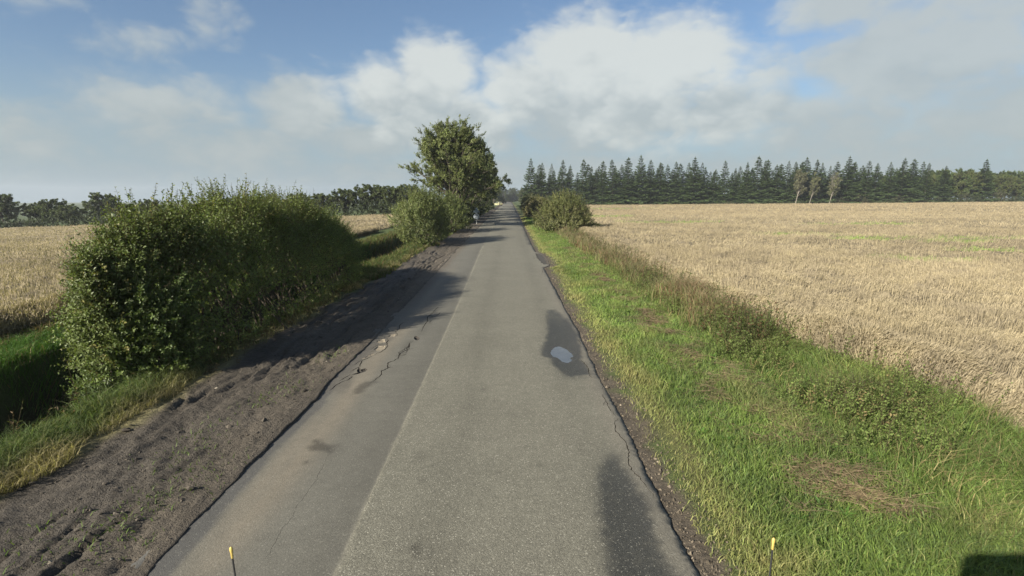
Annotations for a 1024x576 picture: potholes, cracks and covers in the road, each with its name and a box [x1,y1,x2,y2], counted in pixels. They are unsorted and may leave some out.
crack [578,340,654,496]
crack [332,307,441,389]
